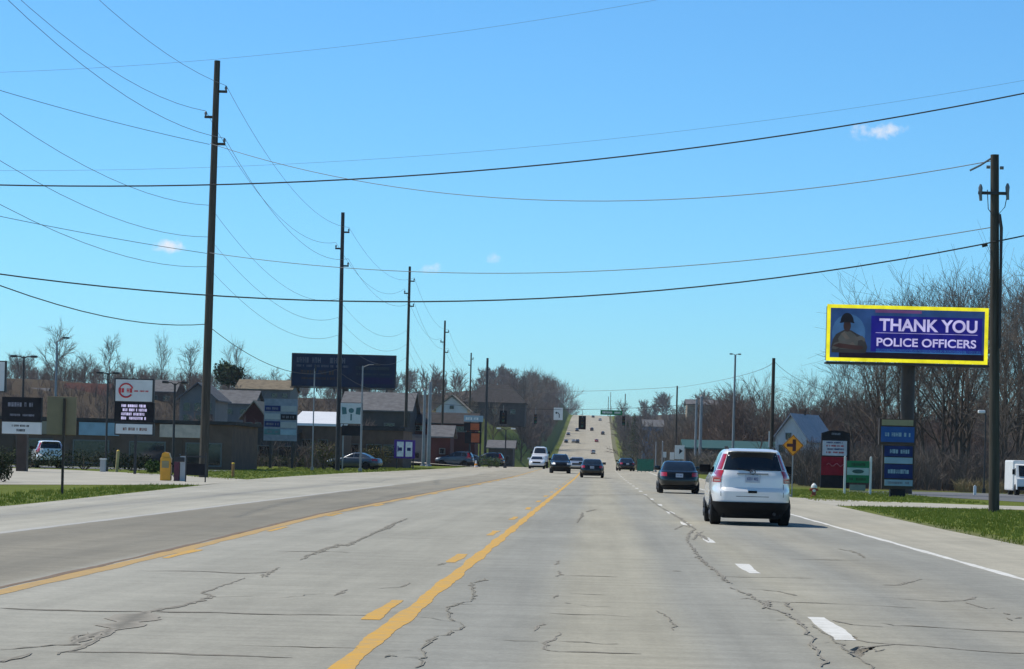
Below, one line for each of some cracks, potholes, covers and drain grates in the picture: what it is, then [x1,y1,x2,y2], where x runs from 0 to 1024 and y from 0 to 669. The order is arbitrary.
crack [639,494,1024,666]
crack [502,593,641,654]
crack [0,518,407,662]
crack [384,578,487,667]
